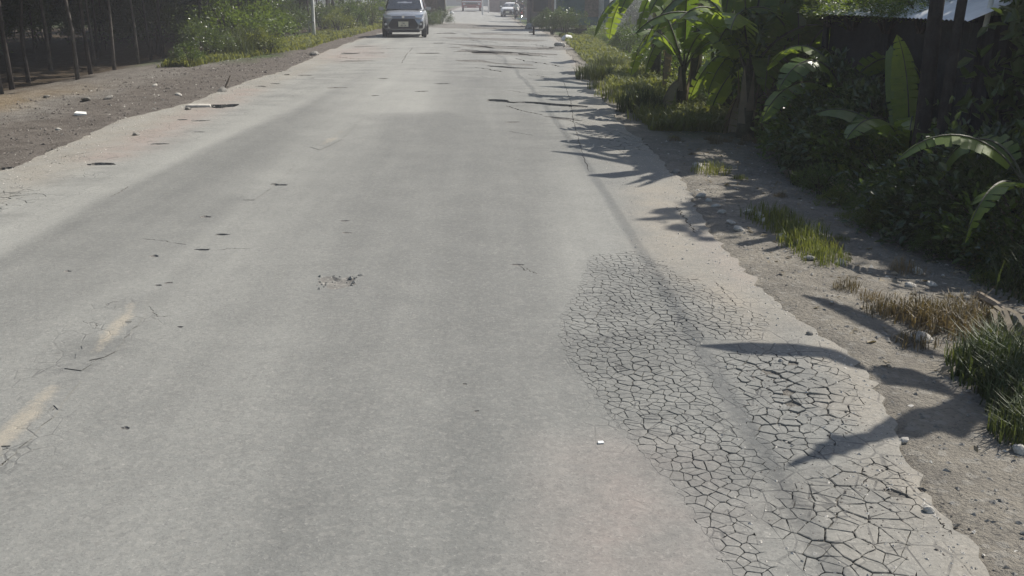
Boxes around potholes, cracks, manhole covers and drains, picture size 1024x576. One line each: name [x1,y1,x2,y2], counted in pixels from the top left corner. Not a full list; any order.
crack [558,251,952,576]
pothole [316,274,363,290]
crack [475,35,566,115]
